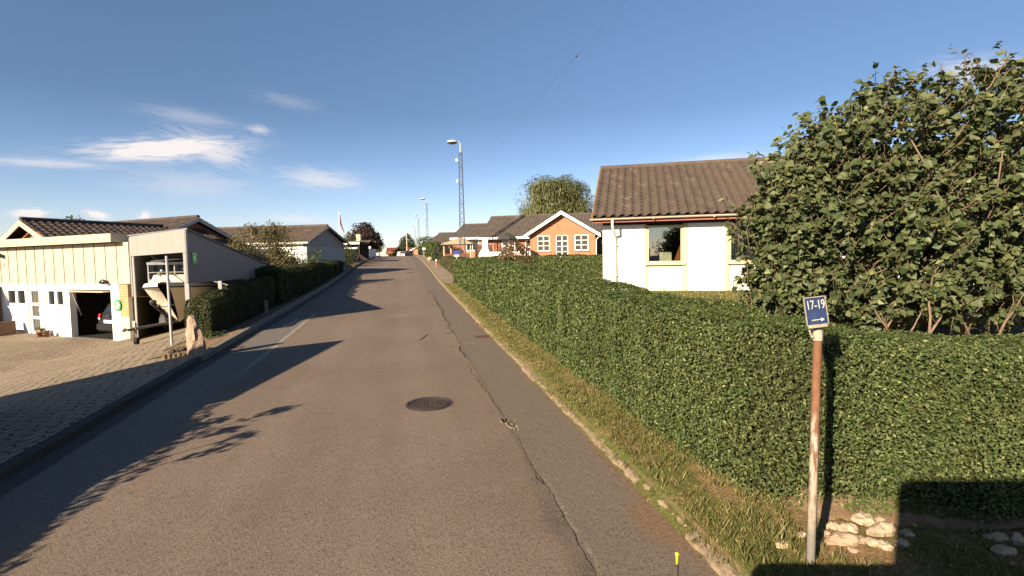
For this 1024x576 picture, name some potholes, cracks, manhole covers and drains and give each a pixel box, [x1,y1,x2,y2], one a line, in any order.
crack [421,291,466,357]
manhole cover [405,397,453,411]
pothole [500,418,519,430]
